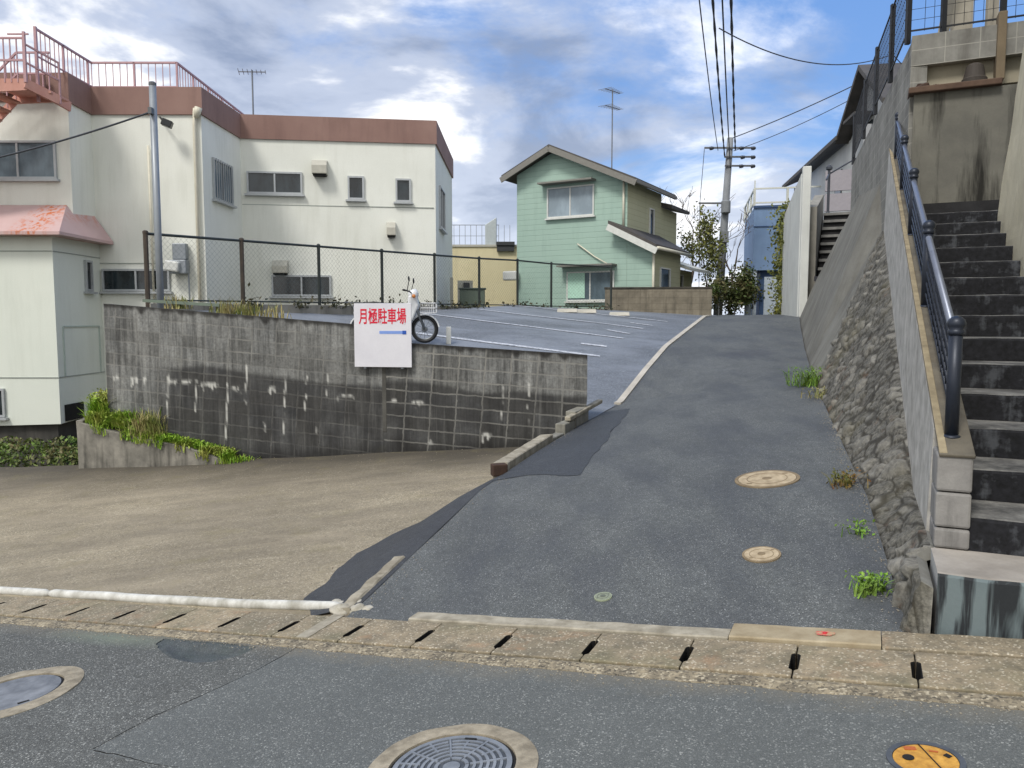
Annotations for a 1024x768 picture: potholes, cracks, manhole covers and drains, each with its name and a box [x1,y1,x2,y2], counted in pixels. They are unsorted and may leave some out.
manhole cover [368,724,539,768]
manhole cover [886,741,967,768]
manhole cover [735,470,800,488]
manhole cover [0,666,84,718]
manhole cover [742,546,781,563]
manhole cover [594,592,612,602]
